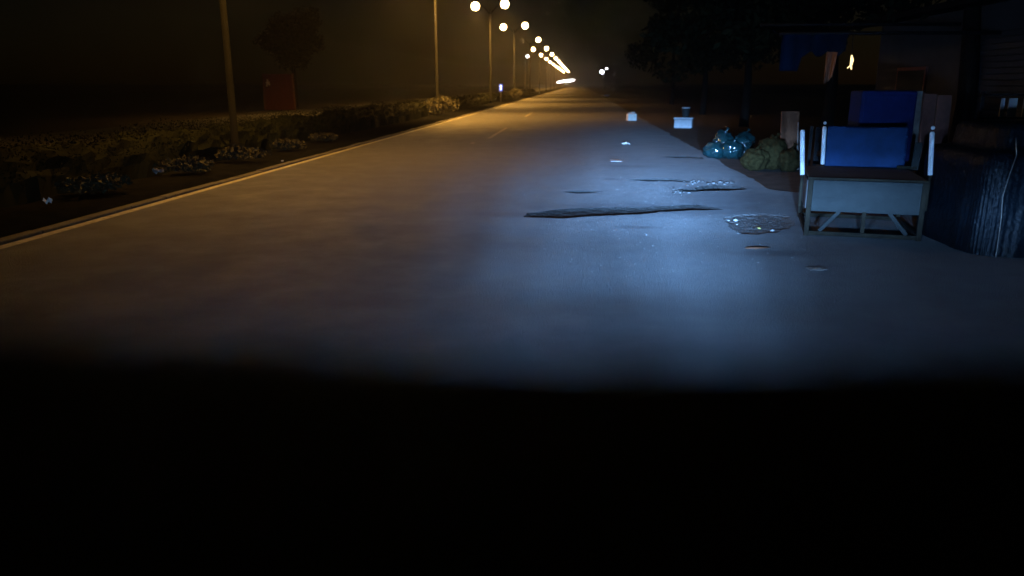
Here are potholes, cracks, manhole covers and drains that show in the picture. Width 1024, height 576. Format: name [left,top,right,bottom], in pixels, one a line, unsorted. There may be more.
pothole [524,205,723,219]
pothole [673,180,747,194]
pothole [723,213,796,235]
